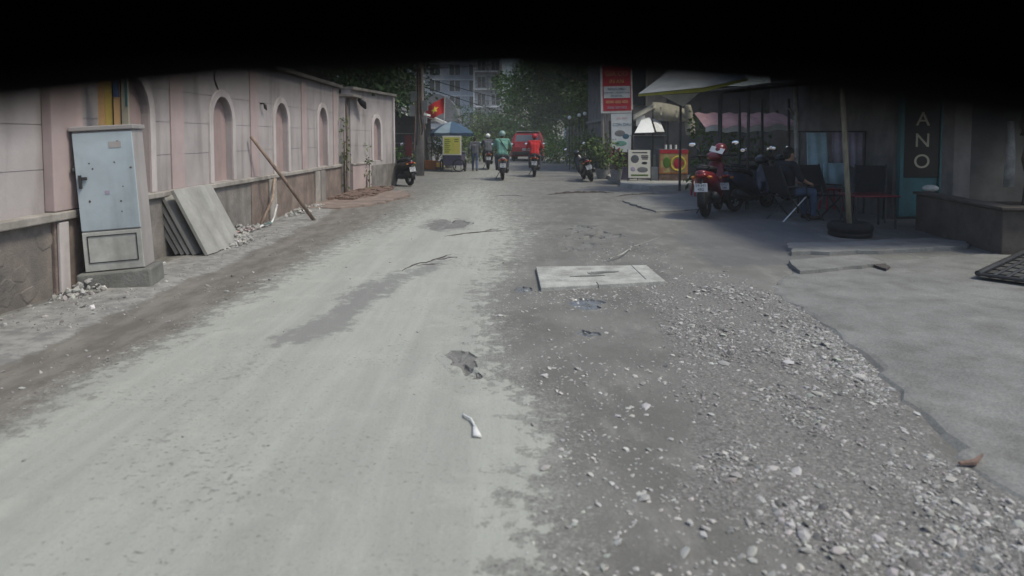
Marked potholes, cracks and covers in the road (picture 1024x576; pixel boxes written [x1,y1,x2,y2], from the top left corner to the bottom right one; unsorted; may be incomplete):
drain grate [975,249,1024,283]
pothole [510,286,537,294]
pothole [569,329,608,340]
manhole cover [536,265,665,292]
pothole [562,297,612,312]
crack [394,253,458,272]
pothole [435,349,487,378]
crack [447,228,507,236]
